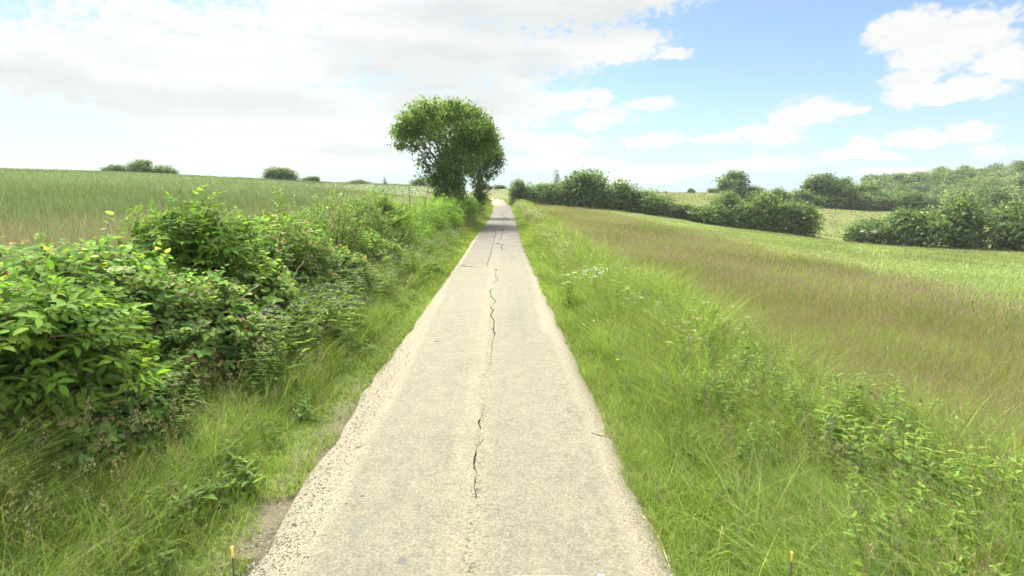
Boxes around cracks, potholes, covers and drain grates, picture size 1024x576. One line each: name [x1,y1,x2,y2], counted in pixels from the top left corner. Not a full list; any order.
crack [489,273,498,366]
